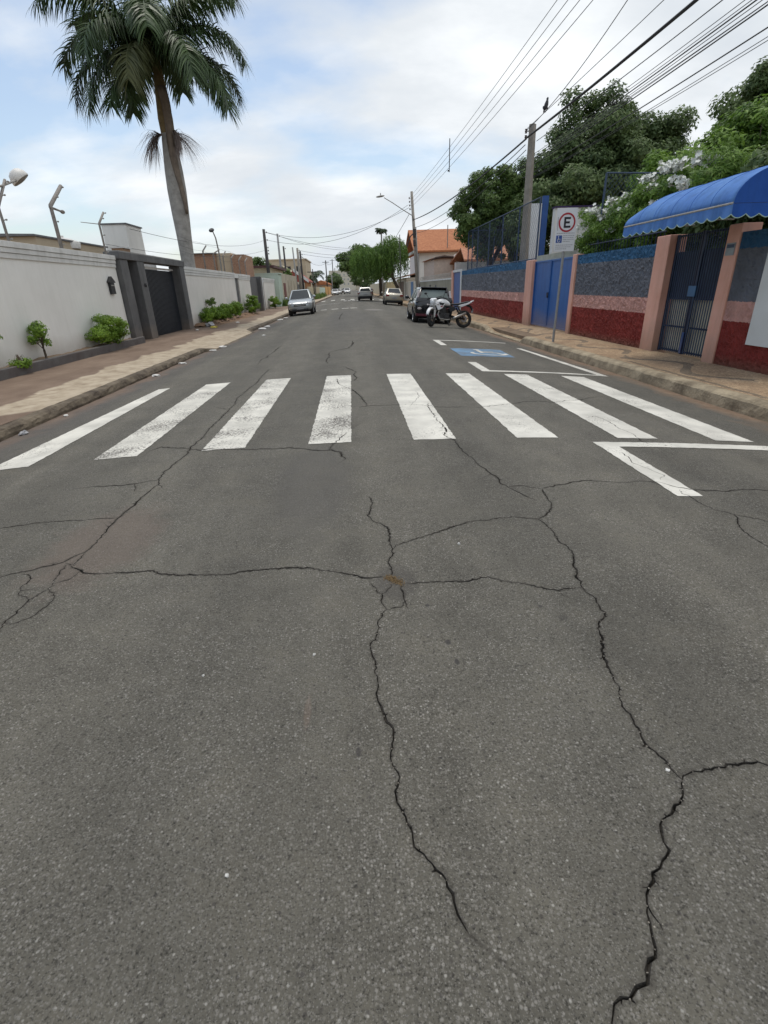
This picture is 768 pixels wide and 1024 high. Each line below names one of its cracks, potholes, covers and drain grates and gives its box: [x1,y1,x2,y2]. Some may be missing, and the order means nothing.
crack [0,372,768,1024]
